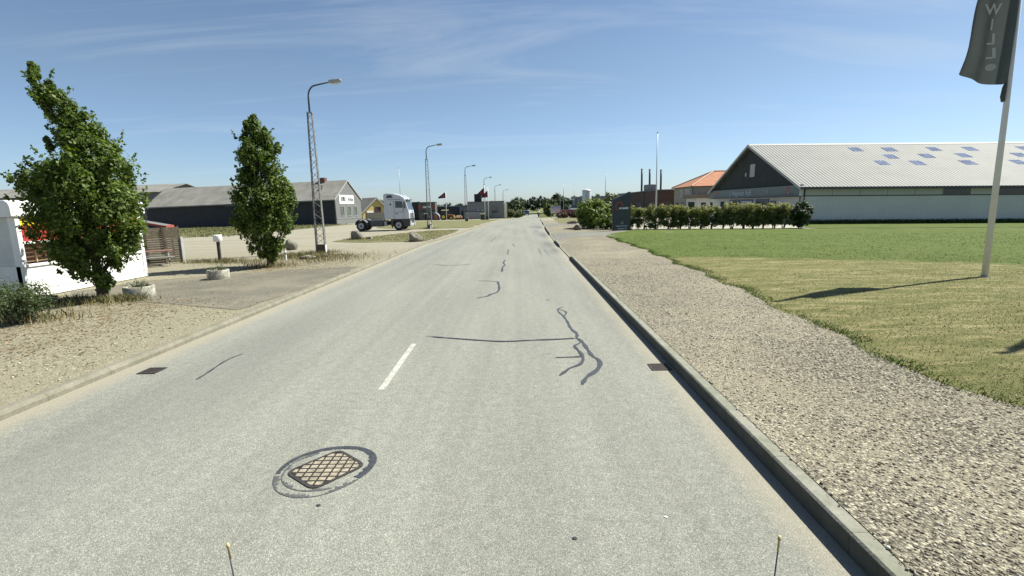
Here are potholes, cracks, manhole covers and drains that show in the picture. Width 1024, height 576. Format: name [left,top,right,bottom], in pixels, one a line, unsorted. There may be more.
manhole cover [273,446,377,498]
drain grate [648,363,672,371]
